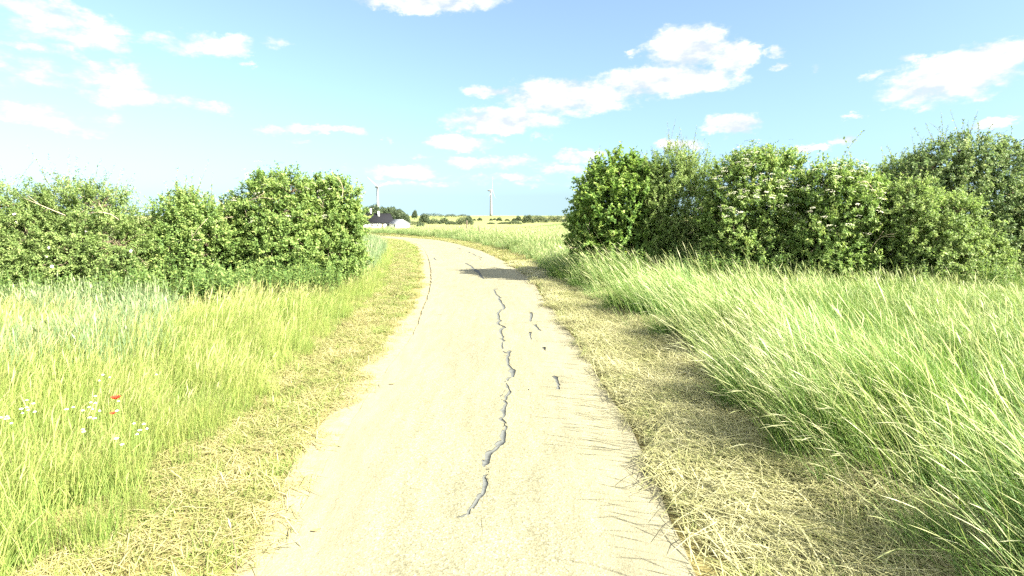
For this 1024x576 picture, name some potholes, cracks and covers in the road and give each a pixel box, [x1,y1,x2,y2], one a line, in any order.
crack [456,248,541,533]
